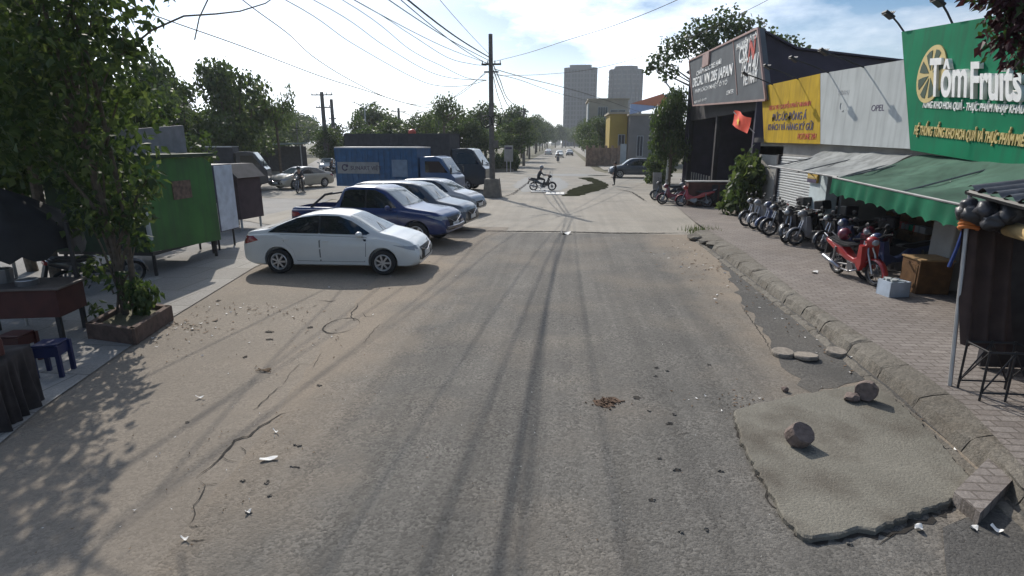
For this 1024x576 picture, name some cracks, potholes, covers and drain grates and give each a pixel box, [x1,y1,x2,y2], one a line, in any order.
crack [189,355,320,541]
